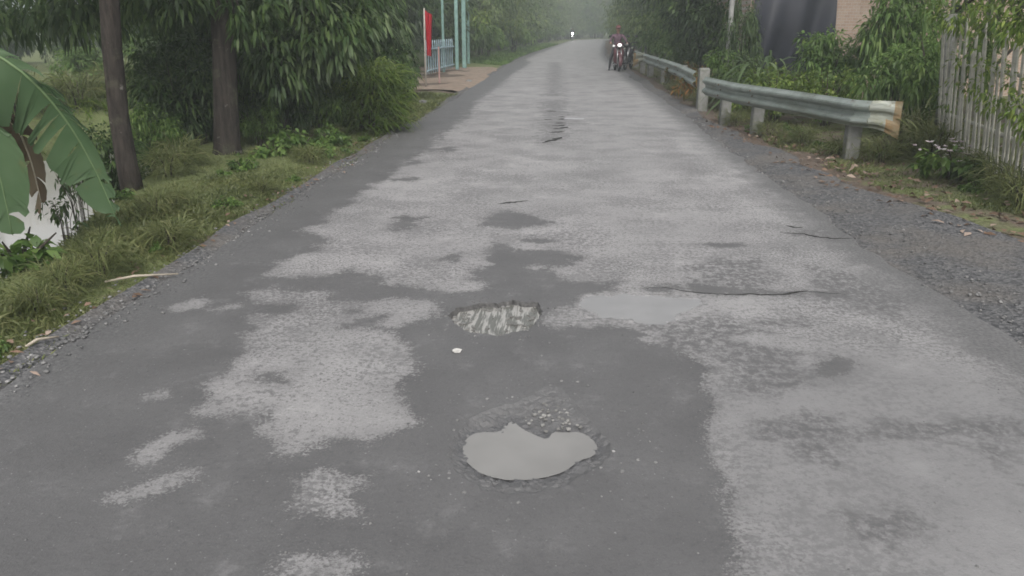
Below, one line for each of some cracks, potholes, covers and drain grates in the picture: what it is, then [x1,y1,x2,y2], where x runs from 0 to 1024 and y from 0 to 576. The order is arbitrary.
pothole [448,300,543,336]
crack [780,226,856,239]
pothole [446,387,611,495]
crack [663,287,849,295]
